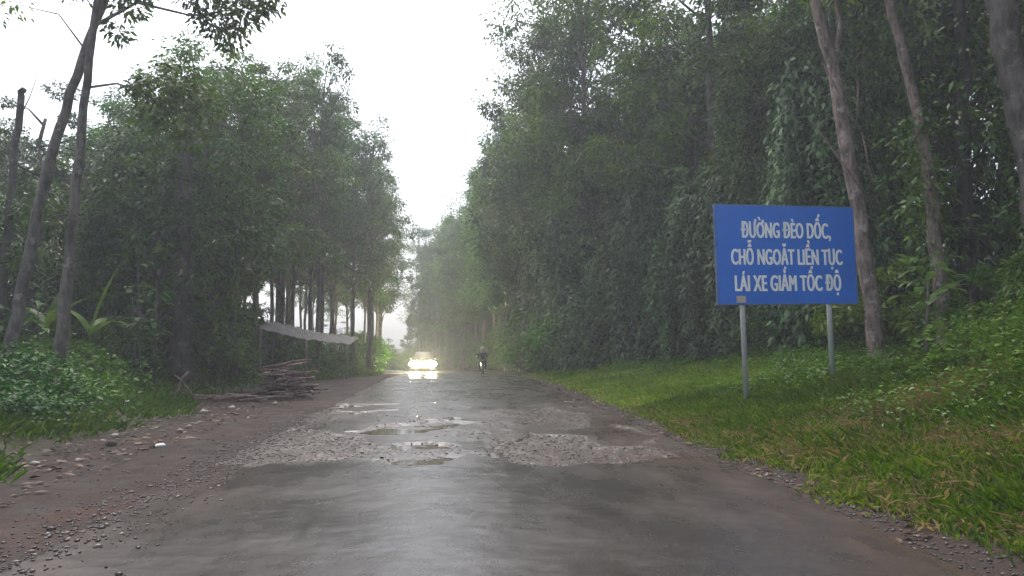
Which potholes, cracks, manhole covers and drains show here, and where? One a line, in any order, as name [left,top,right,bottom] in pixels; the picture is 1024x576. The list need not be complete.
pothole [515,408,589,430]
pothole [373,442,461,468]
pothole [348,417,476,435]
pothole [486,433,675,467]
